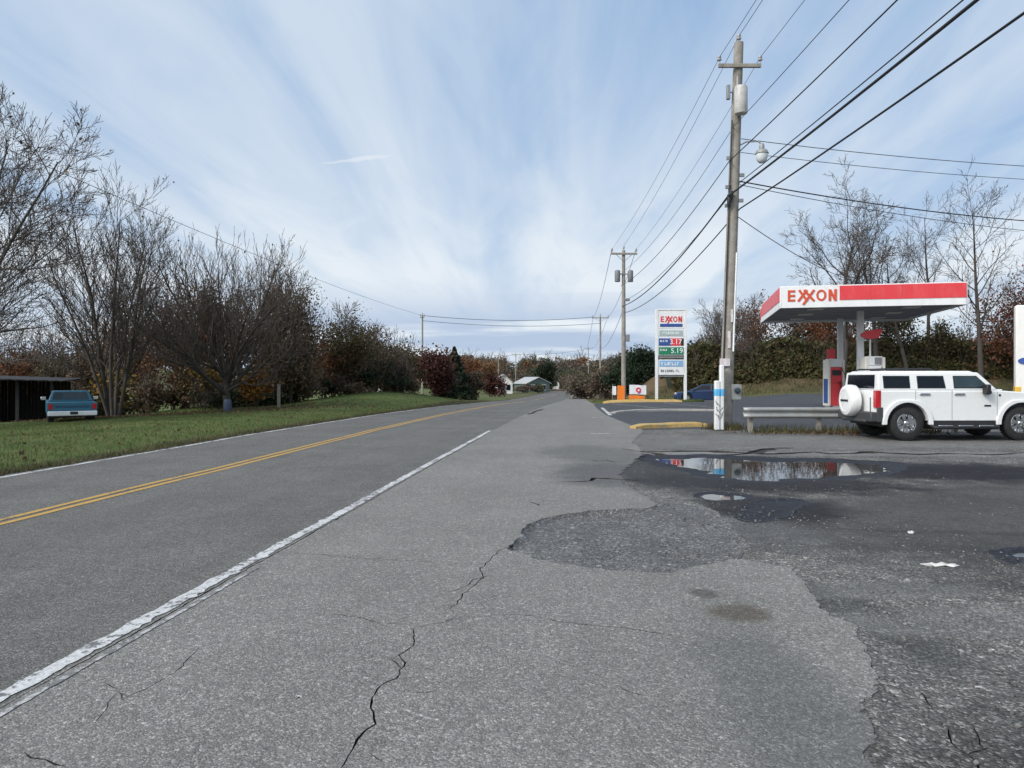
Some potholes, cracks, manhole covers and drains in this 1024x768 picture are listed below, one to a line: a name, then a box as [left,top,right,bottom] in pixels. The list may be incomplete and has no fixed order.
crack [328,545,513,768]
pothole [638,454,908,483]
crack [568,448,1016,482]
crack [948,727,1018,768]
pothole [693,491,754,501]
